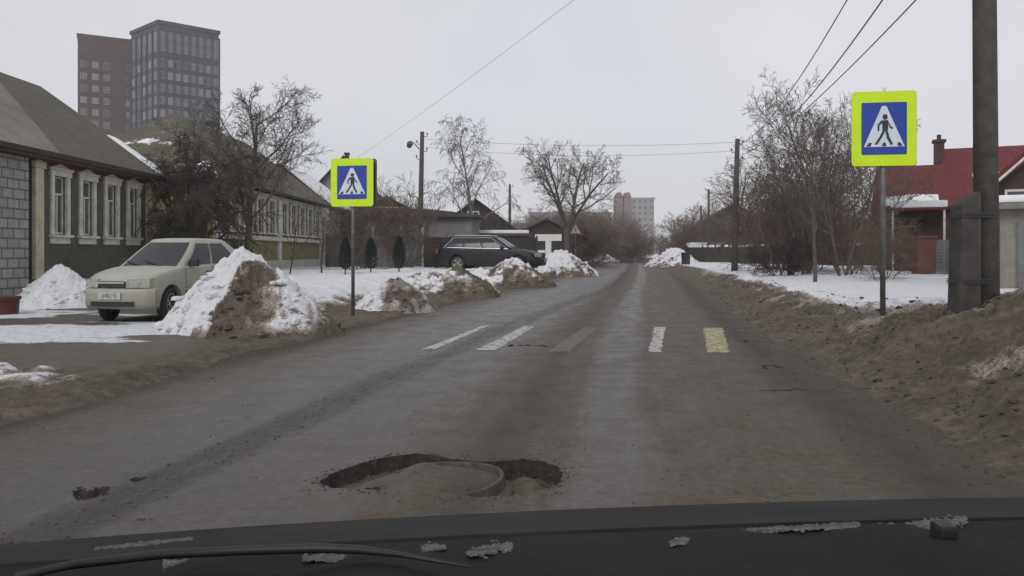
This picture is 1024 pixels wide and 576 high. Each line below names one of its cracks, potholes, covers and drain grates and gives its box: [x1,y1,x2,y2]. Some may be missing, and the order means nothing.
manhole cover [380,462,514,497]
pothole [319,453,563,499]
pothole [70,485,112,501]
